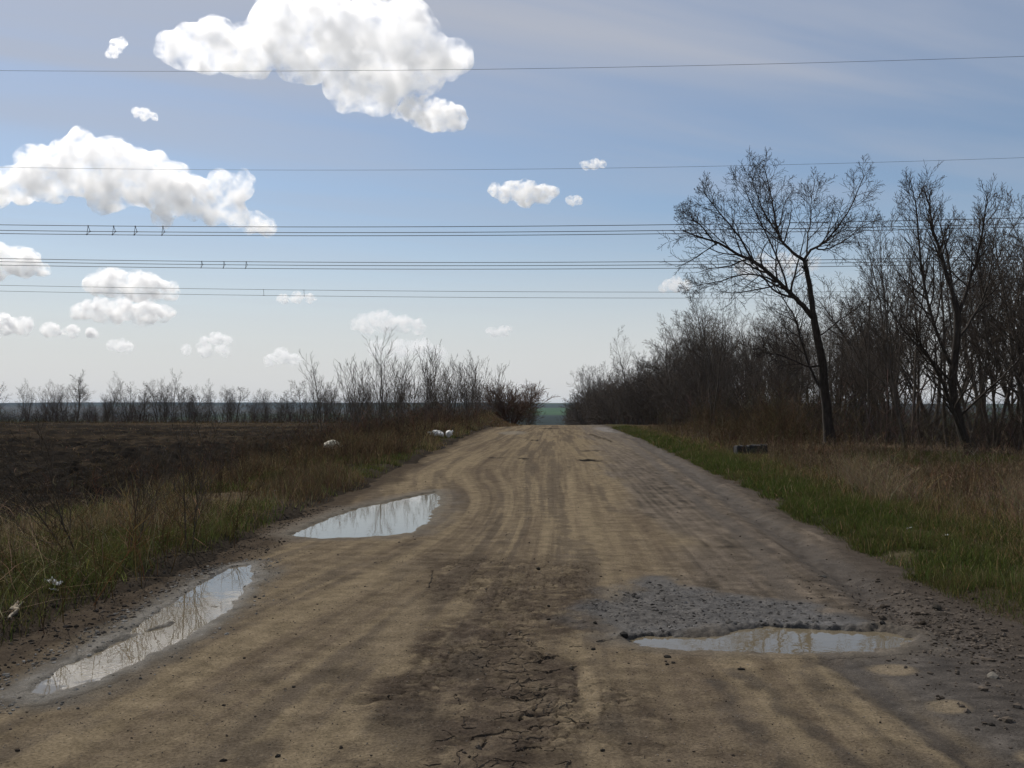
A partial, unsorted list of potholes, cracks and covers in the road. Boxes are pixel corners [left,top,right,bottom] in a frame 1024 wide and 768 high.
crack [423,628,589,768]
pothole [0,561,271,707]
pothole [567,576,940,661]
pothole [263,489,456,541]
